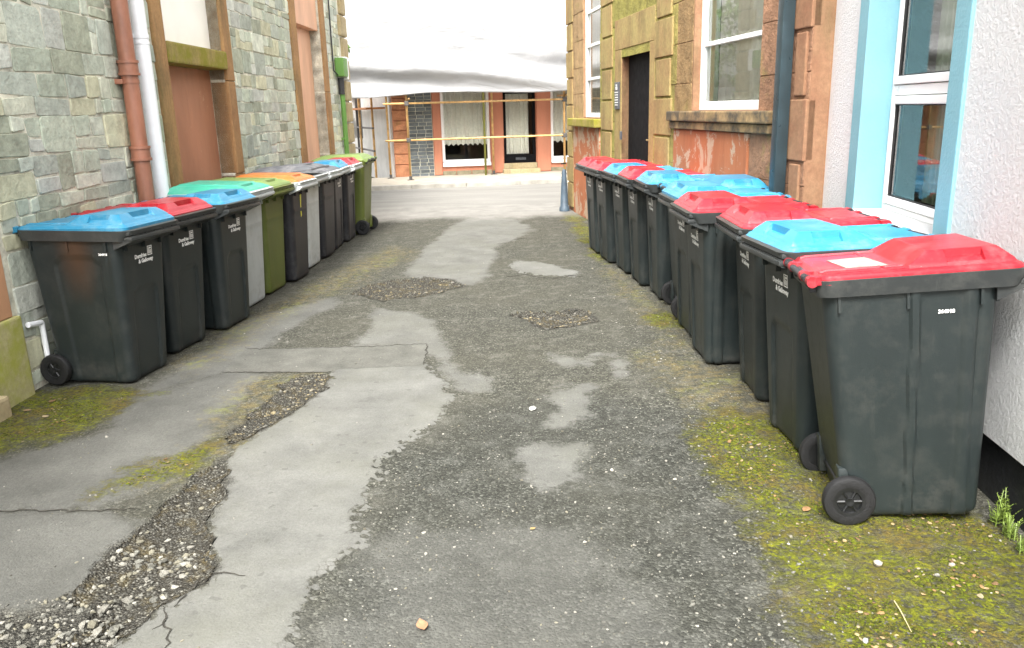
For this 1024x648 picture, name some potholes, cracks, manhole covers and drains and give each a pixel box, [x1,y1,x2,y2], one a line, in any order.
crack [153,568,245,648]
pothole [56,464,232,648]
pothole [225,374,331,444]
pothole [510,309,600,330]
pothole [351,276,466,302]
